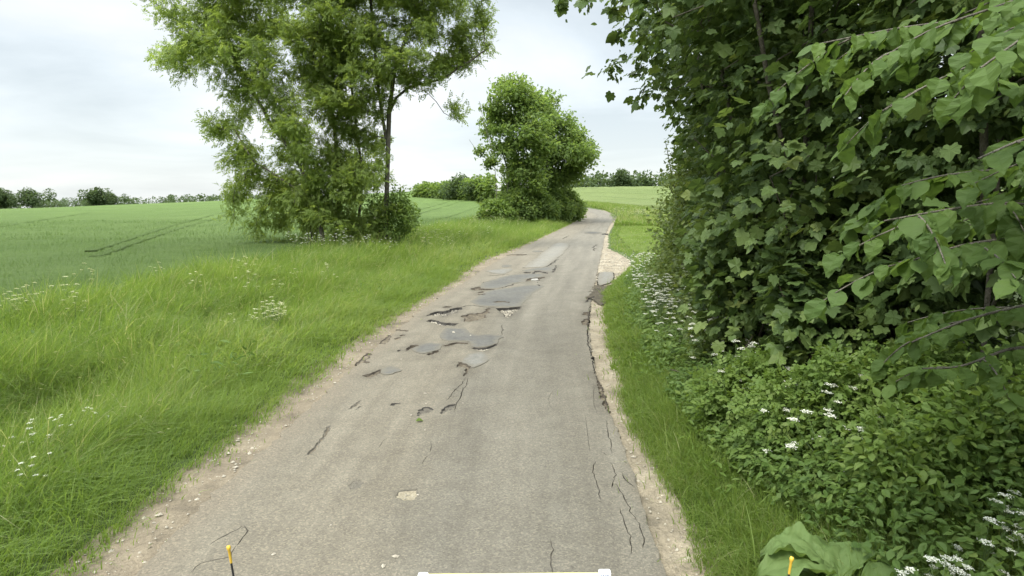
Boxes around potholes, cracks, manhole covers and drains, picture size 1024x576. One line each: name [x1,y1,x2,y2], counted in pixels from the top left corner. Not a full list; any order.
pothole [425,307,462,317]
crack [585,392,645,553]
